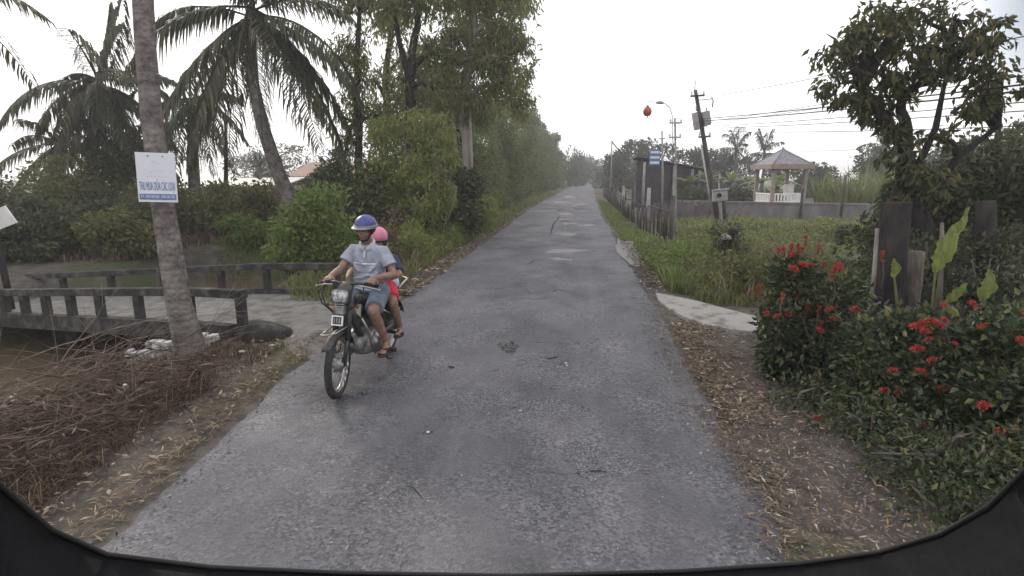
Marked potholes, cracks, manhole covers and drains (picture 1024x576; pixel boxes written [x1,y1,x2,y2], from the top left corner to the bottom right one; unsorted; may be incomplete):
pothole [496,341,521,354]
